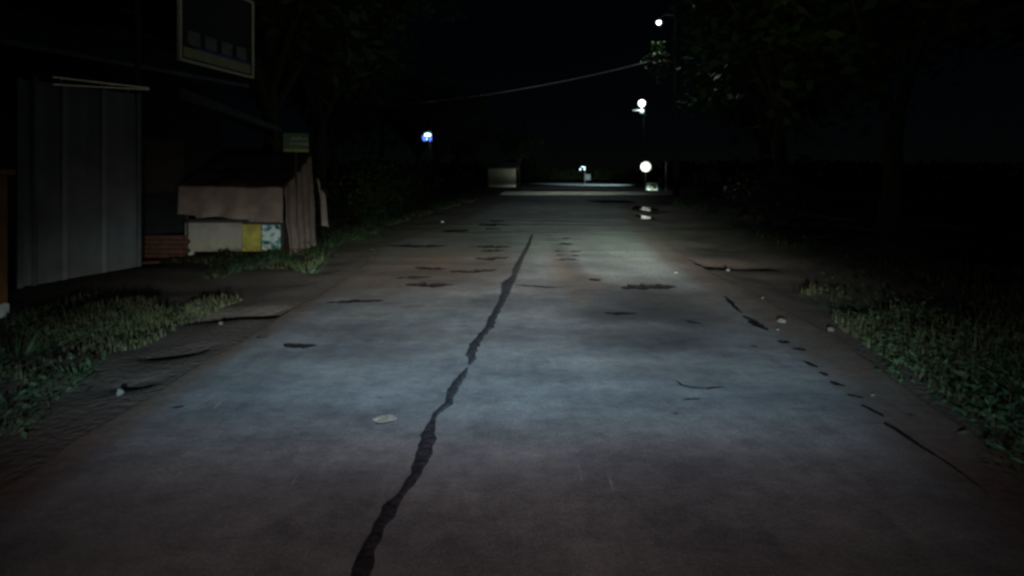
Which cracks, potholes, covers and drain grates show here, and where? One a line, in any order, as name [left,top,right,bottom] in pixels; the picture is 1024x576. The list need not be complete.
crack [675,380,725,400]
crack [725,296,987,492]
